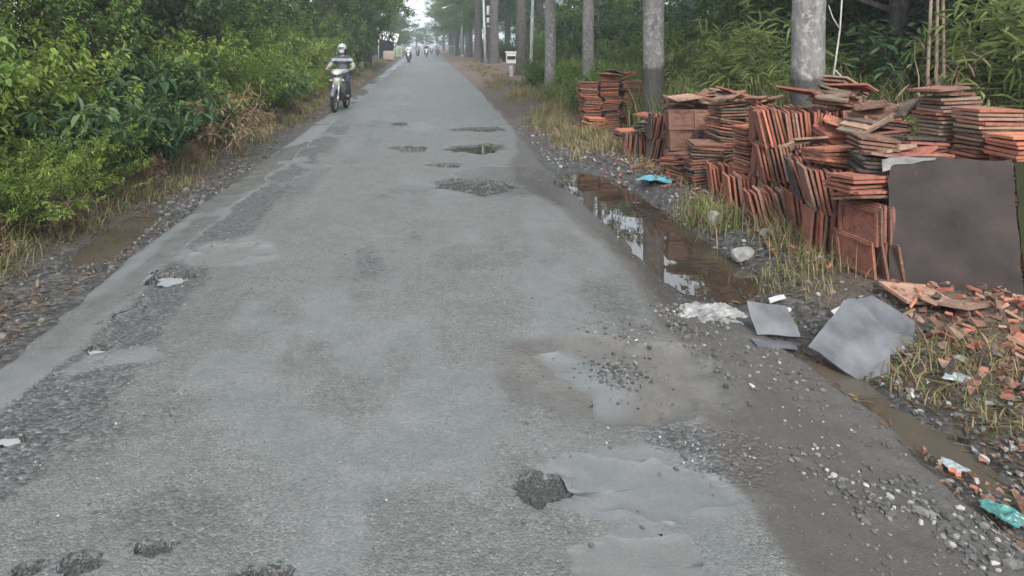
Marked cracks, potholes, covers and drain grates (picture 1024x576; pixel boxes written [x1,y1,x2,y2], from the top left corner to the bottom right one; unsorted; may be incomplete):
pothole [11,559,52,576]
pothole [133,538,178,559]
pothole [511,469,572,509]
pothole [446,144,502,154]
pothole [55,551,104,576]
pothole [144,268,199,288]
pothole [435,179,517,197]
pothole [227,564,296,576]
pothole [85,344,113,355]
